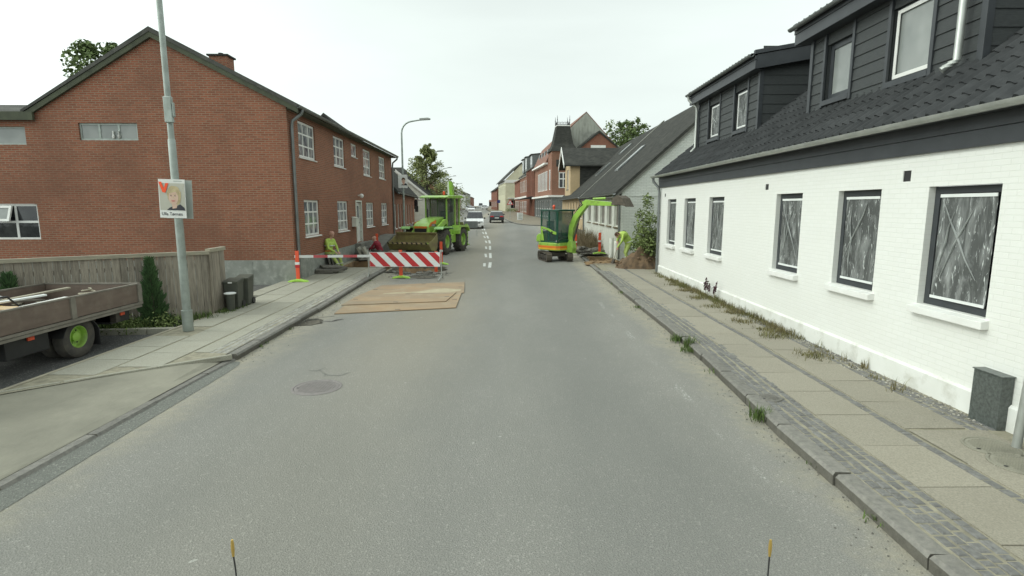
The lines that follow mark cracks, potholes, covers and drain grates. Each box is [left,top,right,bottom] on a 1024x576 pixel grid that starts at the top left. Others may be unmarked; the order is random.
manhole cover [960,436,1024,458]
manhole cover [985,452,1024,475]
manhole cover [290,379,342,396]
